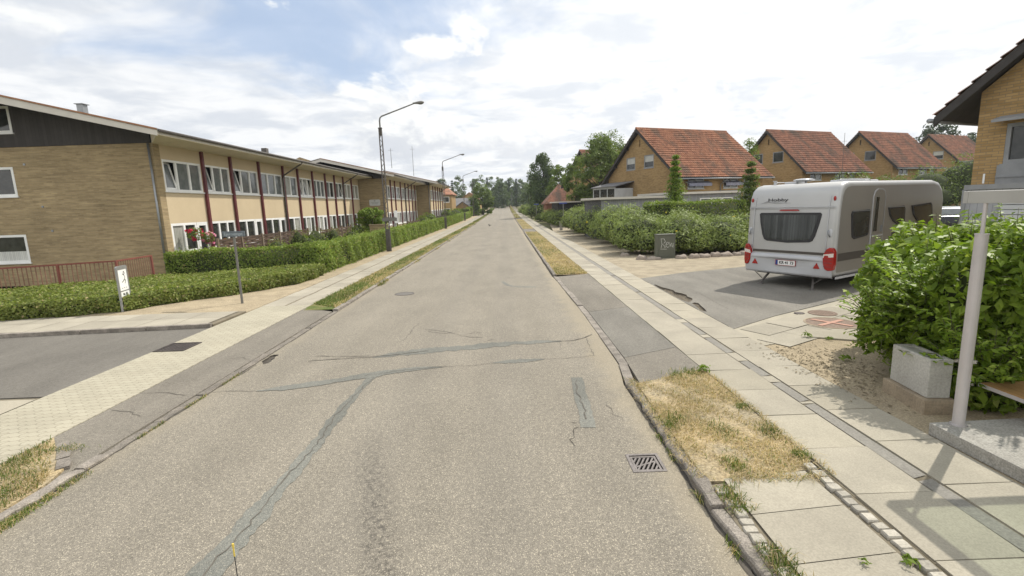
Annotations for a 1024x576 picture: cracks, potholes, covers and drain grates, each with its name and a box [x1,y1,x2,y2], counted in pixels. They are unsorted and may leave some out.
manhole cover [803,317,857,330]
drain grate [625,453,667,473]
manhole cover [152,342,202,352]
